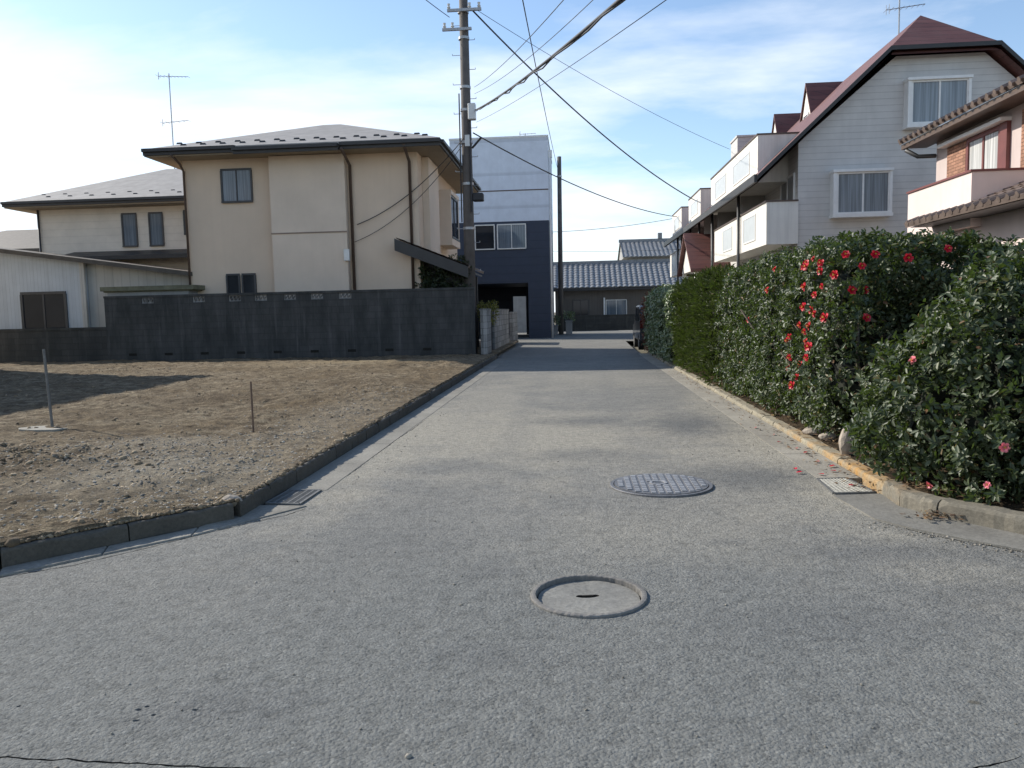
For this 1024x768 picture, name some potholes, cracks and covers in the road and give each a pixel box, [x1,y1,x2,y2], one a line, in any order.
drain grate [265,489,322,505]
manhole cover [530,574,648,619]
crack [0,753,247,768]
manhole cover [610,474,713,498]
crack [973,756,1021,768]
drain grate [816,477,877,495]
